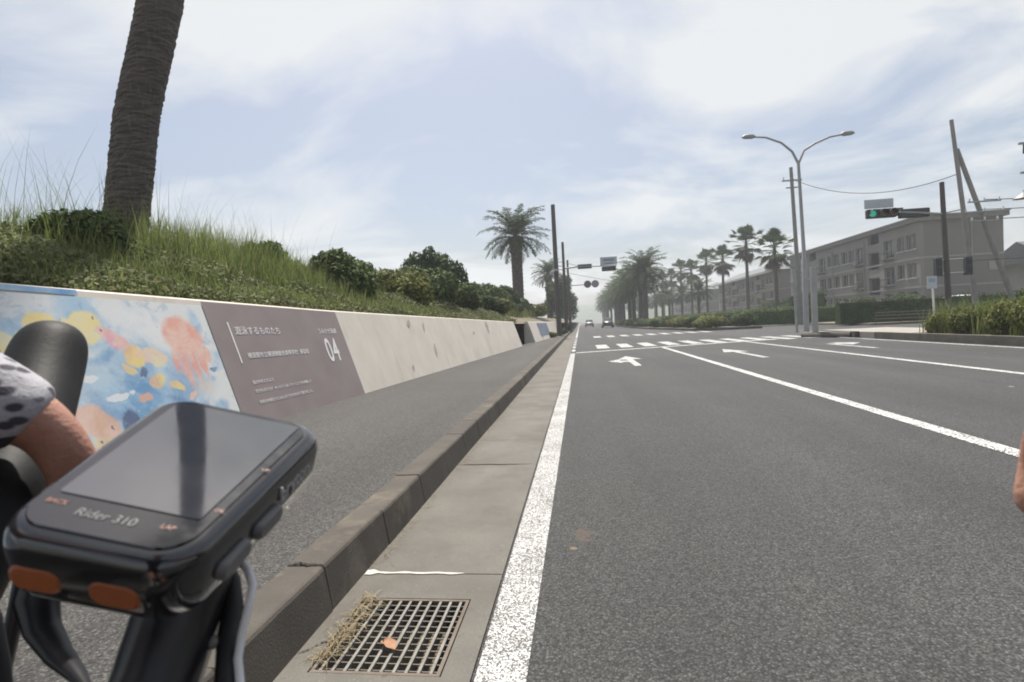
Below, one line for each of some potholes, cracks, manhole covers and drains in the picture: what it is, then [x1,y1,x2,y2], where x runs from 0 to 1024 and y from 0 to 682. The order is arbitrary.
drain grate [309,598,470,677]
